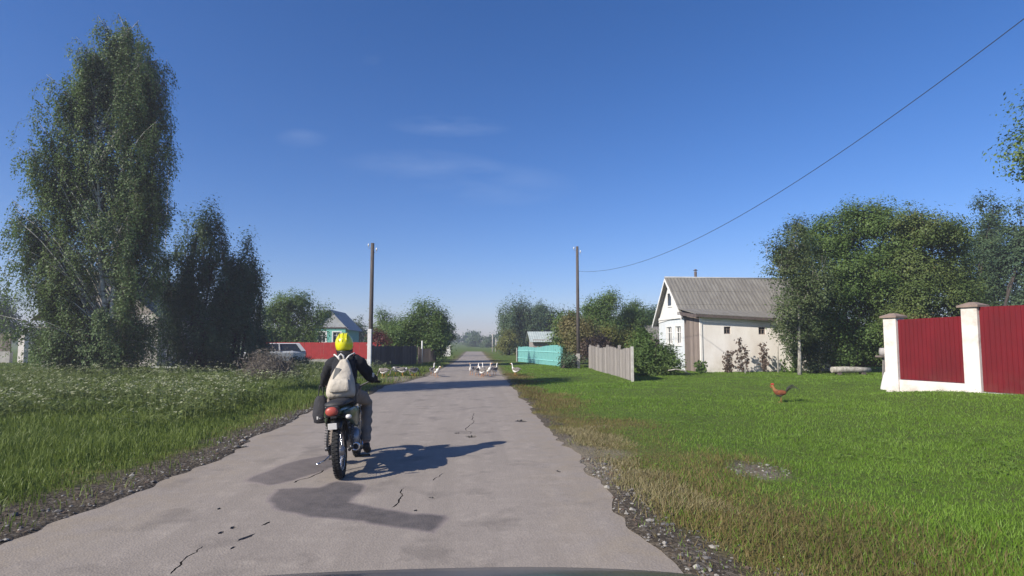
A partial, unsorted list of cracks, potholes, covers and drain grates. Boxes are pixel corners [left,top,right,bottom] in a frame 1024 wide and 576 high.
crack [170,546,203,574]
